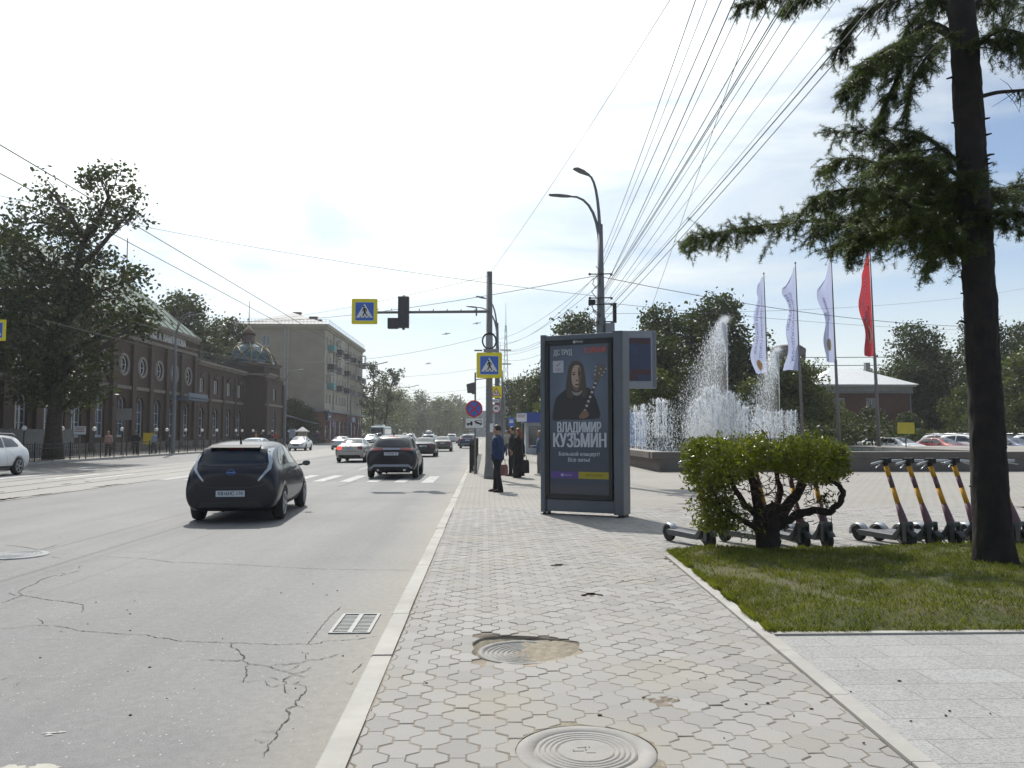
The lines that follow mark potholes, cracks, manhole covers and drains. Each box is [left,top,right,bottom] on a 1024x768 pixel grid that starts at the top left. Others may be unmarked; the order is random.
drain grate [328,613,381,634]
crack [5,545,364,610]
manhole cover [472,633,583,667]
manhole cover [496,717,681,768]
crack [16,607,374,757]
manhole cover [0,550,50,560]
